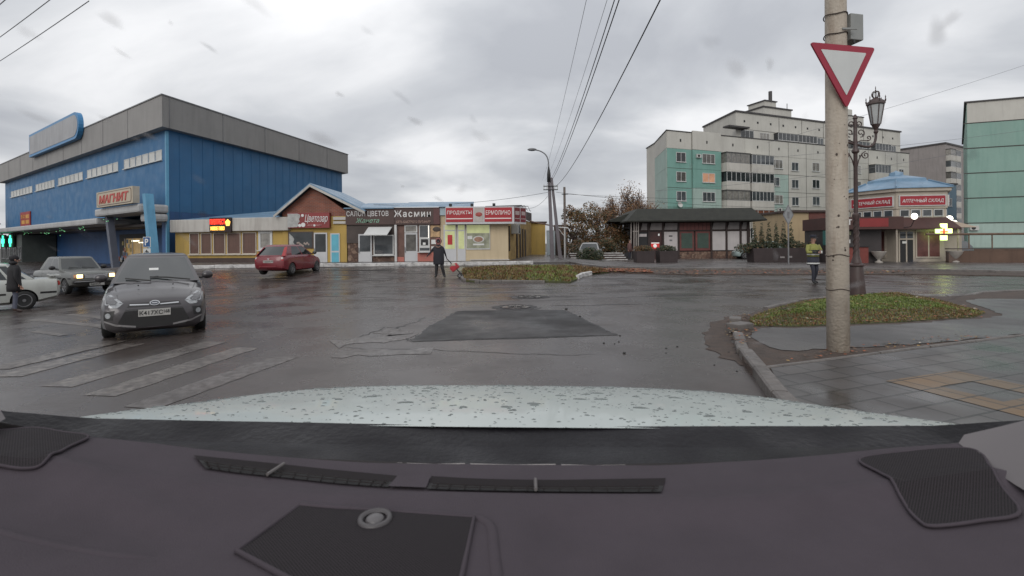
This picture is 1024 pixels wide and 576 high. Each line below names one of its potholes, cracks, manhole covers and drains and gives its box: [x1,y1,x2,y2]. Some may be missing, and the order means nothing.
crack [350,318,583,355]
